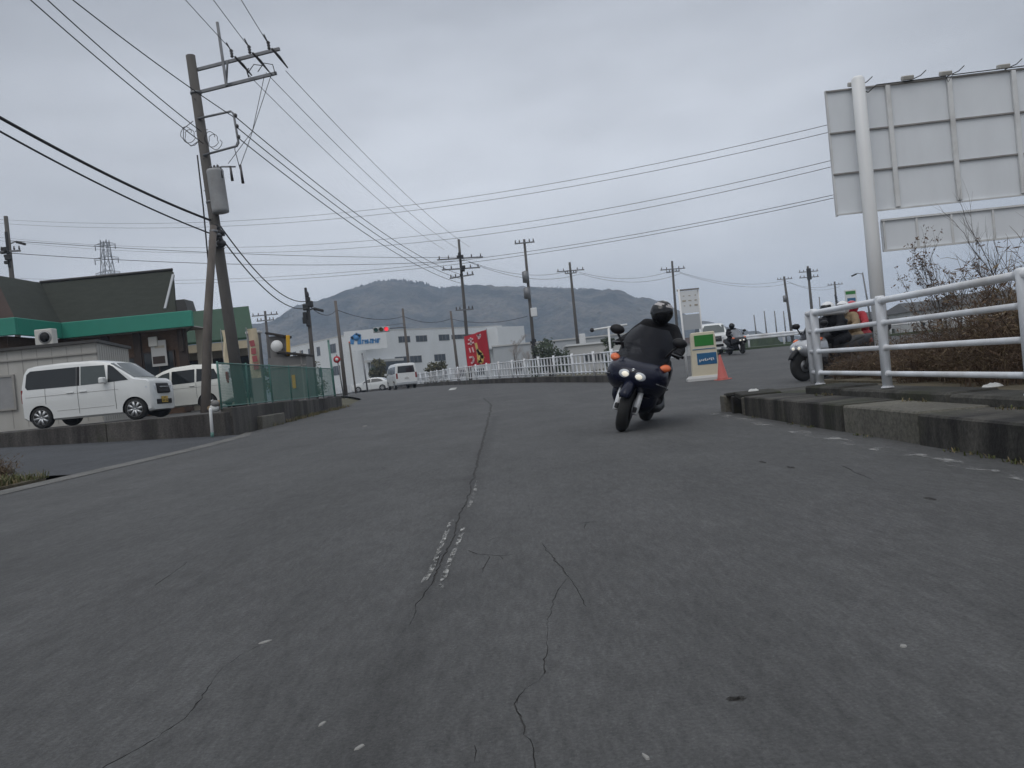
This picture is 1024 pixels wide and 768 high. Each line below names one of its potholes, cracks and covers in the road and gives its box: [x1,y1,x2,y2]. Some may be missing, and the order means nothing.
crack [514,545,586,768]
crack [102,644,261,768]
